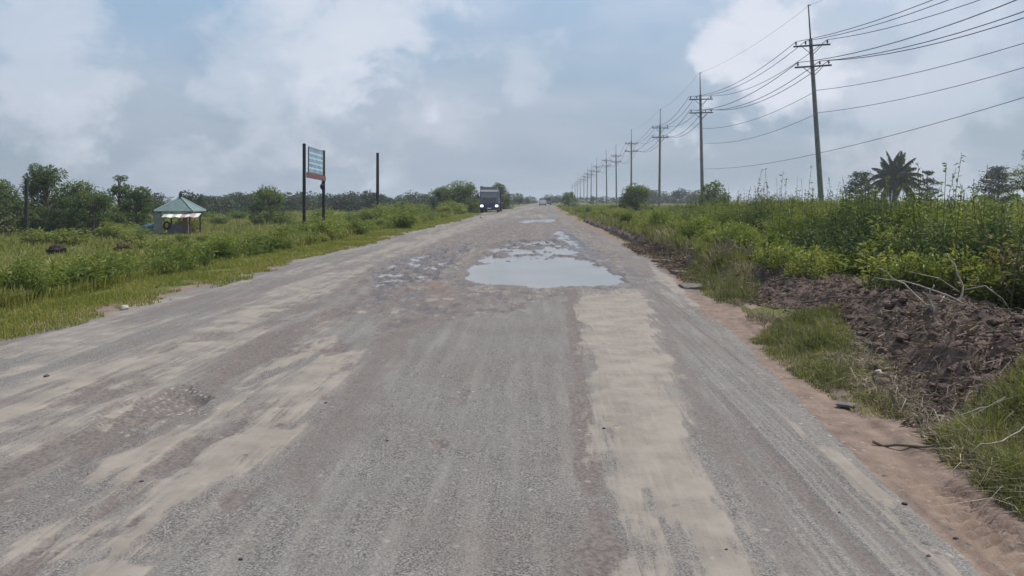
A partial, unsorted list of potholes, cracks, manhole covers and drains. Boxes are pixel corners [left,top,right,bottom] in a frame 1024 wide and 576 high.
pothole [362,243,474,291]
pothole [454,238,637,288]
pothole [92,384,218,431]
